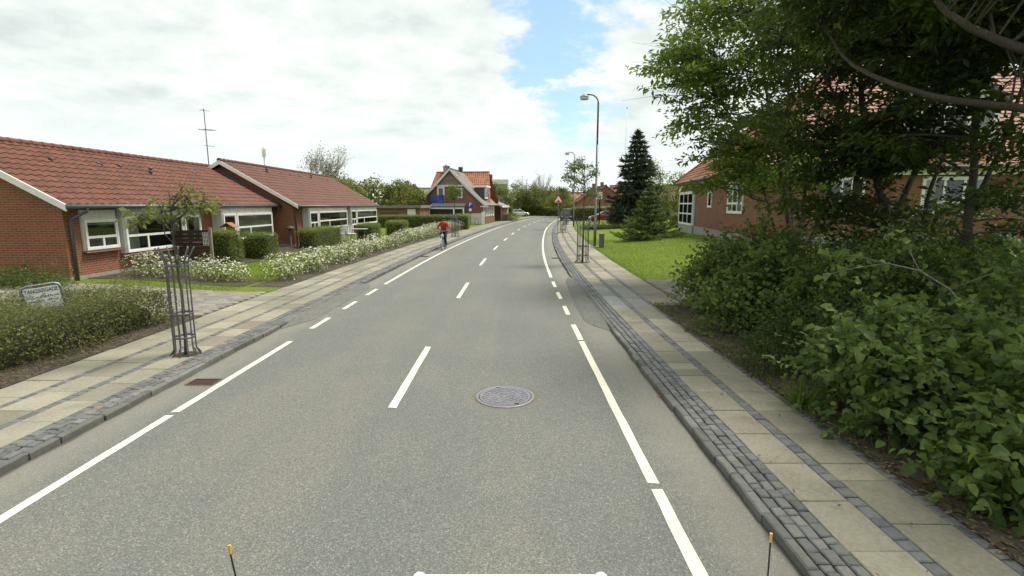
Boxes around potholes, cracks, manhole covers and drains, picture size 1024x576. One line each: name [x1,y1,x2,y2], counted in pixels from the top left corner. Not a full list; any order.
manhole cover [476,386,535,408]
